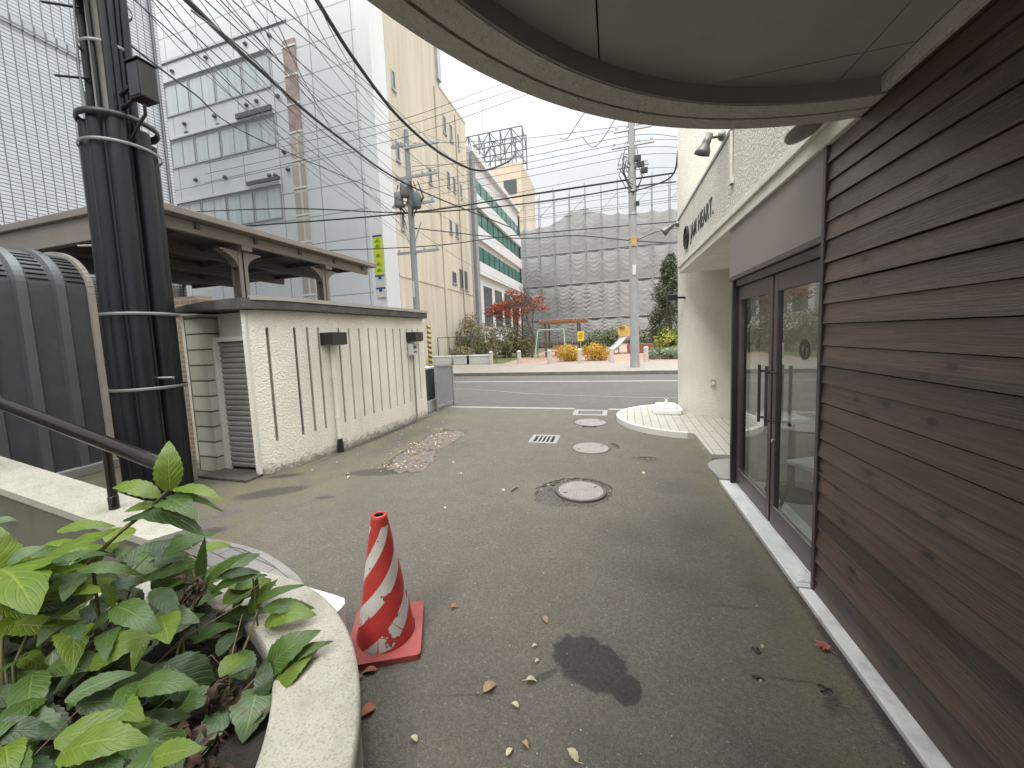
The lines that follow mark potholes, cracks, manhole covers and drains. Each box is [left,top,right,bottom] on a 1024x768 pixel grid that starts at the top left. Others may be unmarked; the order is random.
pothole [747,671,772,687]
manhole cover [555,480,607,503]
pothole [812,680,840,701]
pothole [747,643,766,659]
manhole cover [574,418,608,428]
manhole cover [571,442,611,454]
drain grate [528,434,560,444]
